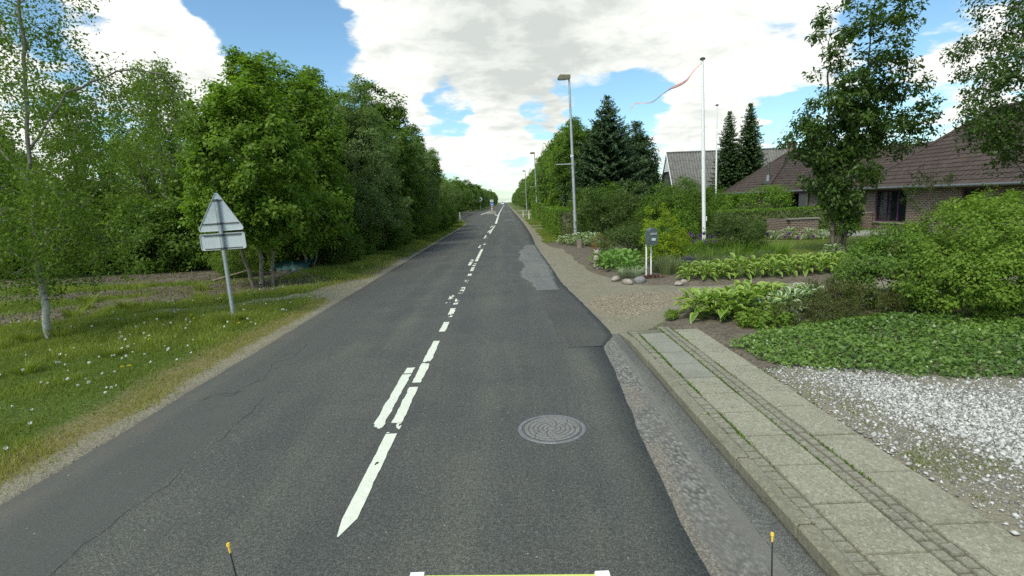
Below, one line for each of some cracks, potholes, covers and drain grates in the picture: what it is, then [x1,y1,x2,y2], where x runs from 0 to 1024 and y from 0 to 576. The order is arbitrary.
manhole cover [518,415,586,444]
